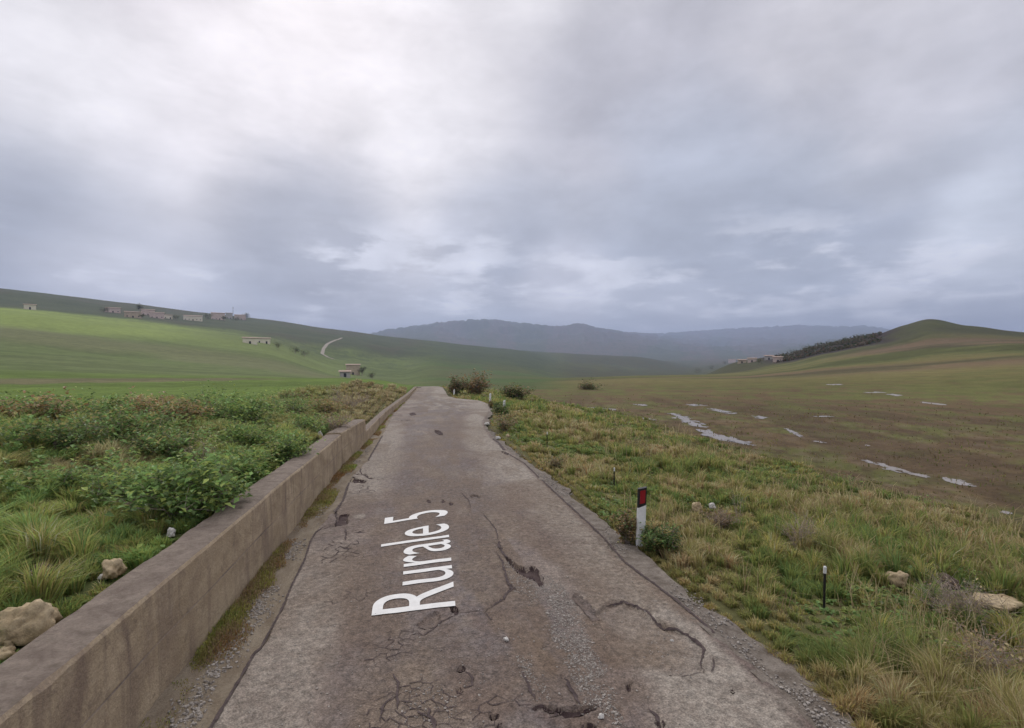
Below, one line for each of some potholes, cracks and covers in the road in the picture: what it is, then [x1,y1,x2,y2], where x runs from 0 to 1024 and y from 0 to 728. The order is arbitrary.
crack [364,493,535,728]
pothole [335,514,349,527]
pothole [532,704,599,718]
pothole [506,558,544,587]
crack [493,438,715,677]
